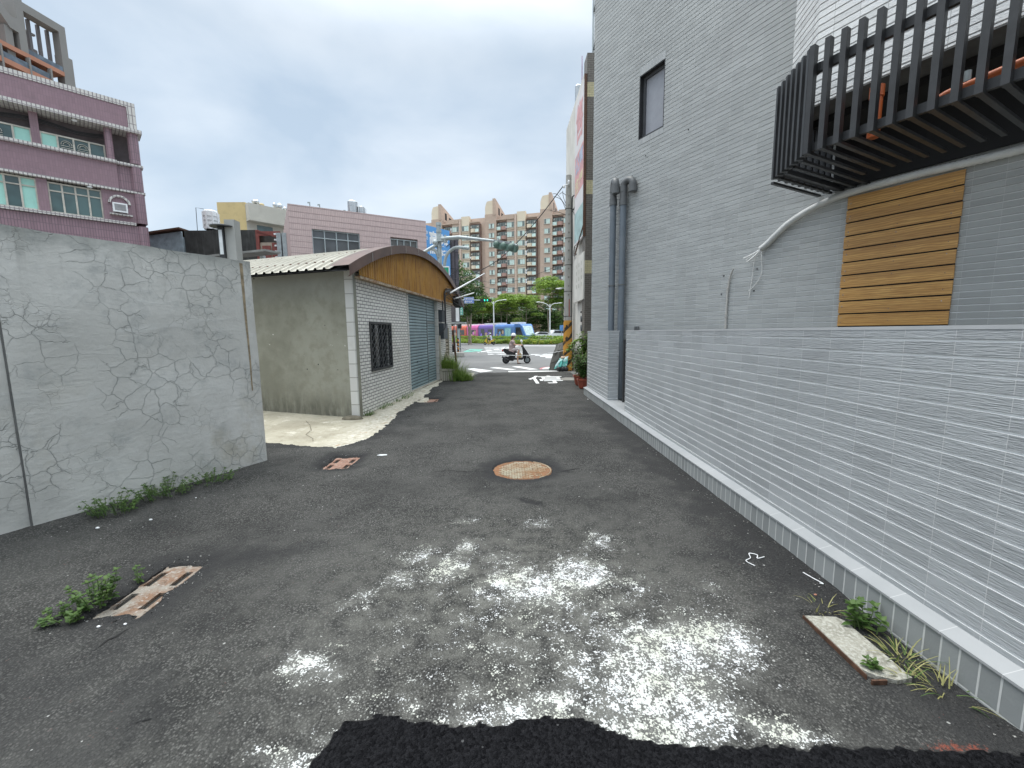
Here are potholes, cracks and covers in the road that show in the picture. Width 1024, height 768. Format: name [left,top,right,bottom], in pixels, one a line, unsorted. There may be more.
manhole cover [493,461,552,480]
